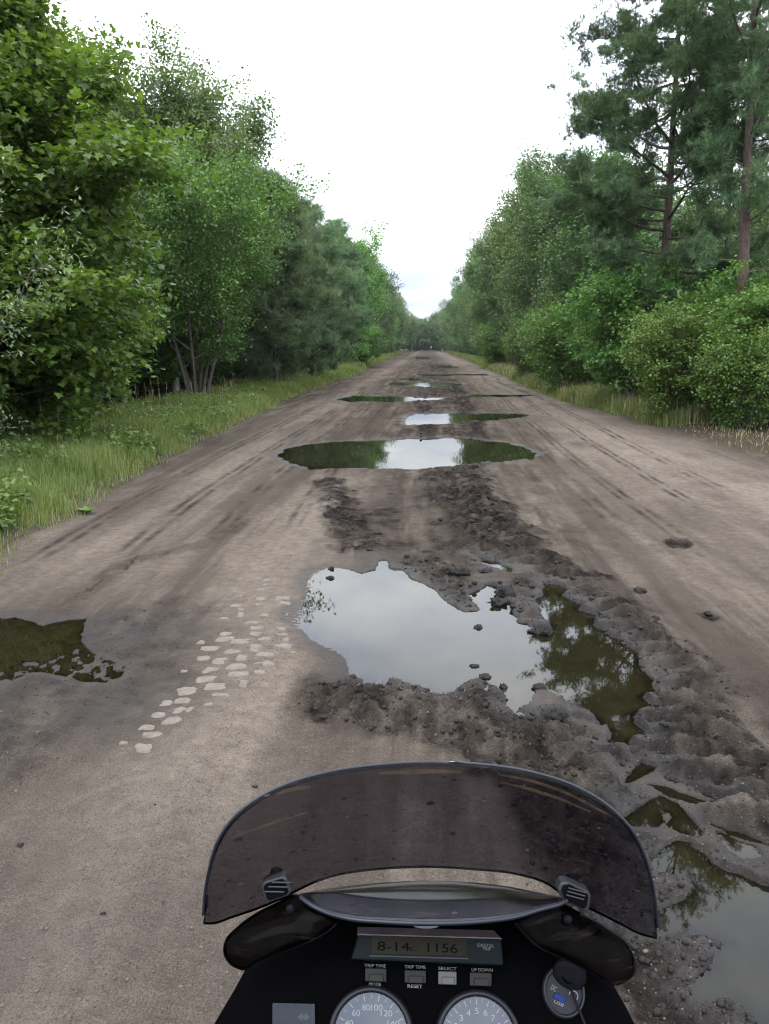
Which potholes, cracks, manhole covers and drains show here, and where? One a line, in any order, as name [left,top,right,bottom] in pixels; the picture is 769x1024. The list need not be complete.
pothole [631,832,769,1024]
pothole [294,557,667,748]
pothole [710,824,769,863]
pothole [272,435,541,470]
pothole [642,778,717,807]
pothole [616,790,713,840]
pothole [659,537,695,550]
pothole [0,614,132,690]
pothole [475,553,519,572]
pothole [399,411,532,425]
